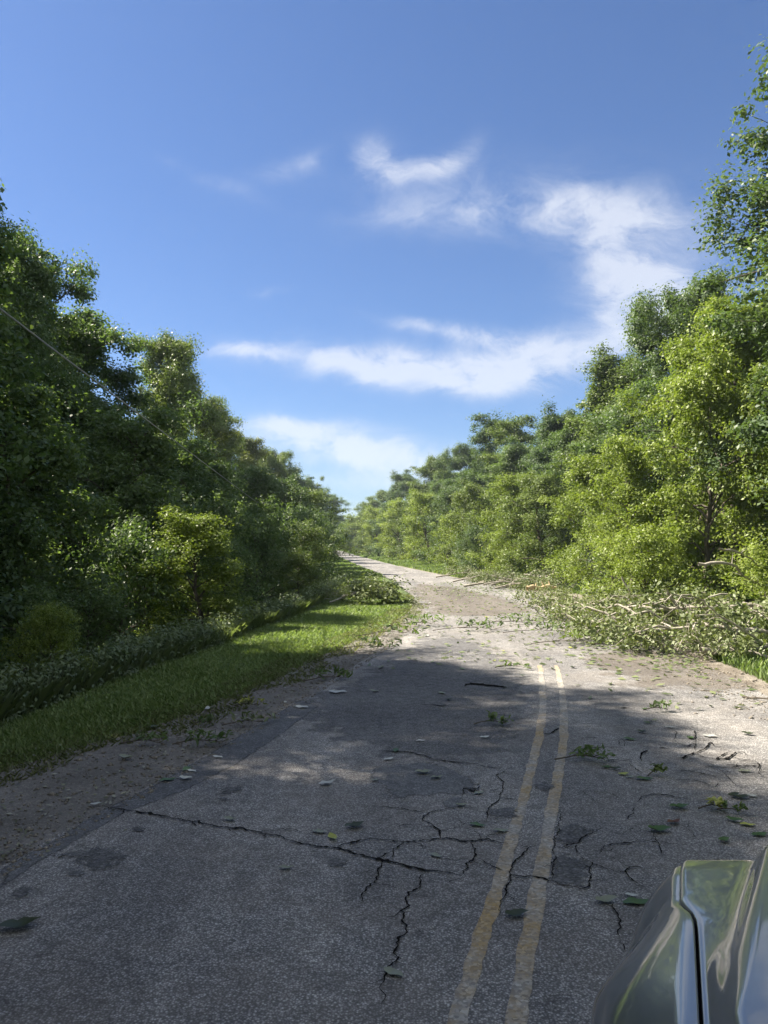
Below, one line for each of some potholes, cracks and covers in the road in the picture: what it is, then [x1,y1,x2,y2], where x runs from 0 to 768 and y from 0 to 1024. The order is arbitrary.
crack [108,728,761,1005]
